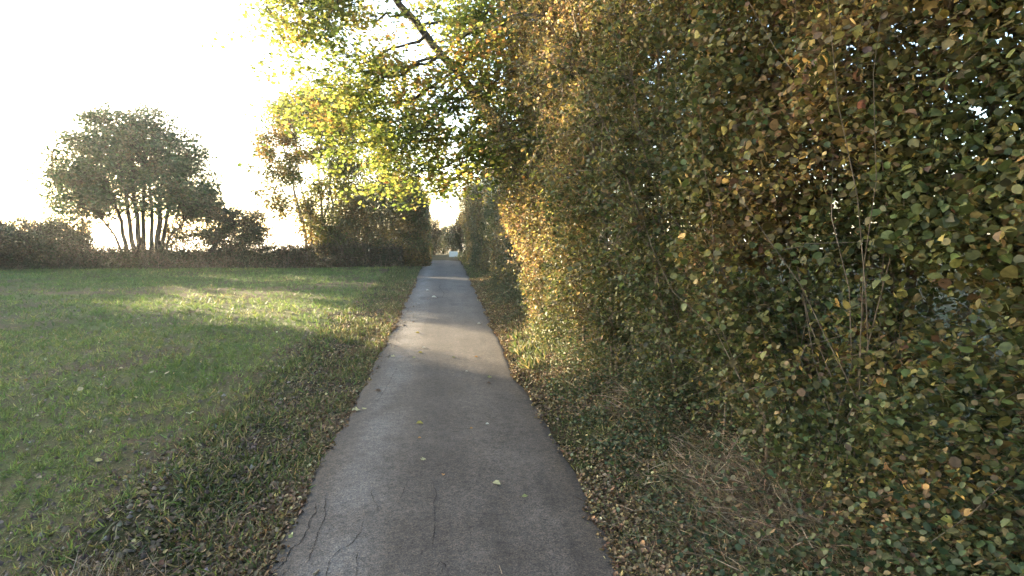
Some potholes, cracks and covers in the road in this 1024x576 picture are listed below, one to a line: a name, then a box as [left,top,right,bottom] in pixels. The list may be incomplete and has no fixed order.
crack [273,500,364,576]
